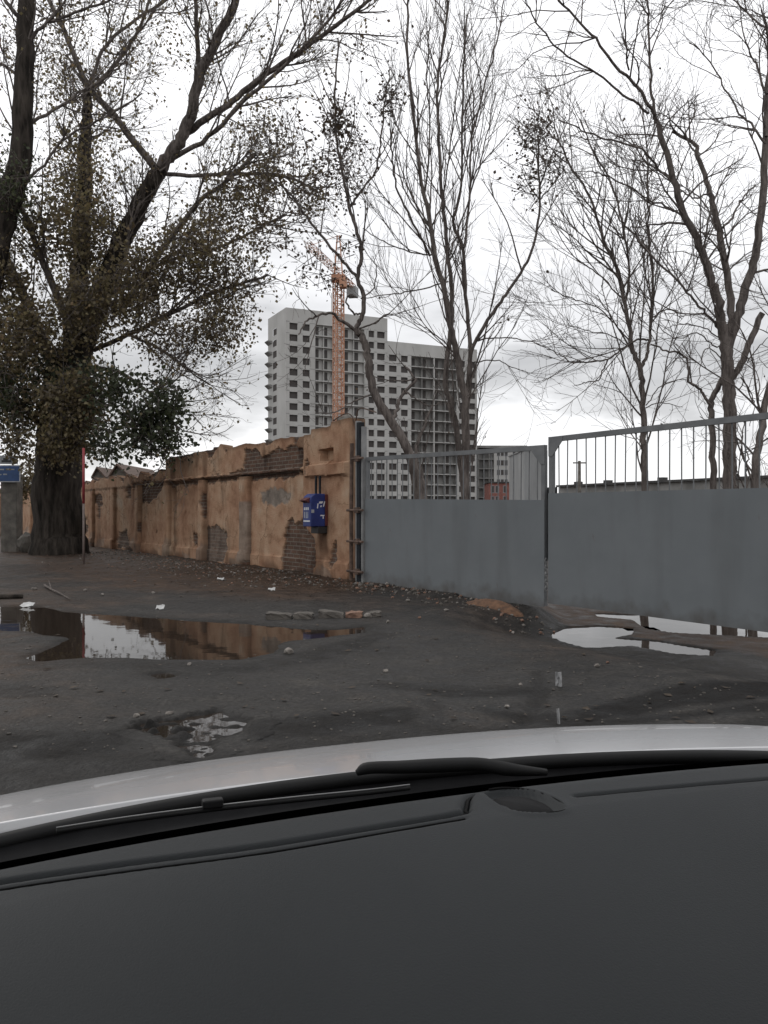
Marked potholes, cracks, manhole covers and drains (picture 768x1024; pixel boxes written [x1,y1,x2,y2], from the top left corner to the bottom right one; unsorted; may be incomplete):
pothole [99,704,283,764]
